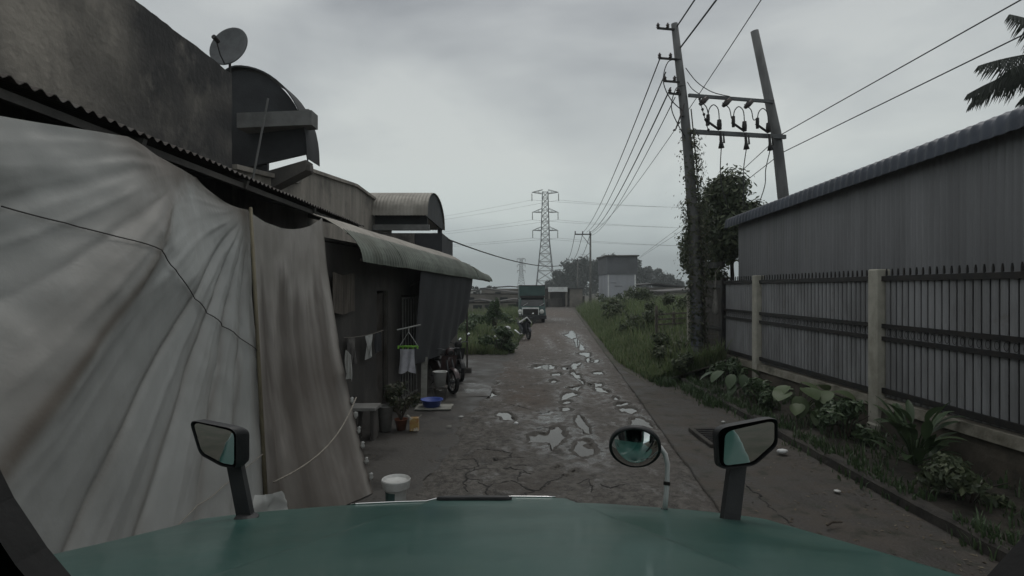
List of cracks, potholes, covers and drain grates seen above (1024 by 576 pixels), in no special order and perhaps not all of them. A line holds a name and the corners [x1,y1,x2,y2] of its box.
pothole [494,411,517,421]
pothole [559,391,581,400]
pothole [627,416,656,429]
pothole [569,438,601,459]
crack [746,485,795,527]
pothole [614,406,641,415]
crack [456,449,625,496]
pothole [526,425,572,452]
pothole [573,414,593,435]
drain grate [689,427,716,448]
